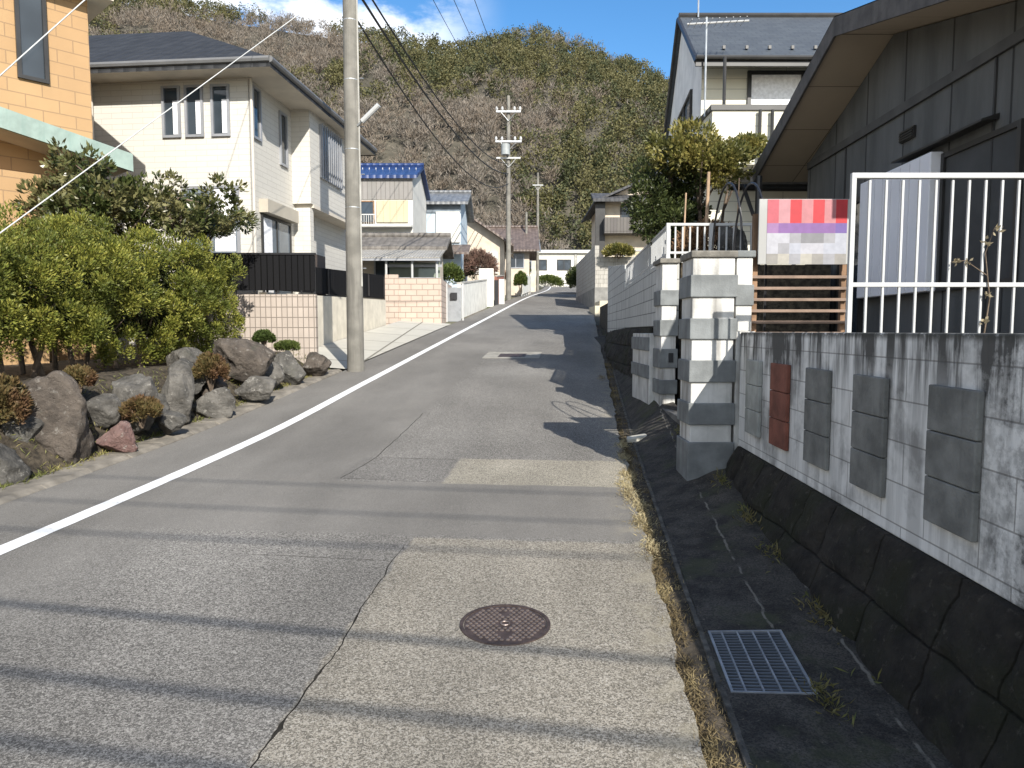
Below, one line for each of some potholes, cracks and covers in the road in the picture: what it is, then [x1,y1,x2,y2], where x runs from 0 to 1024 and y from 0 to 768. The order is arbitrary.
drain grate [707,630,818,695]
crack [250,543,406,768]
manhole cover [460,604,551,646]
